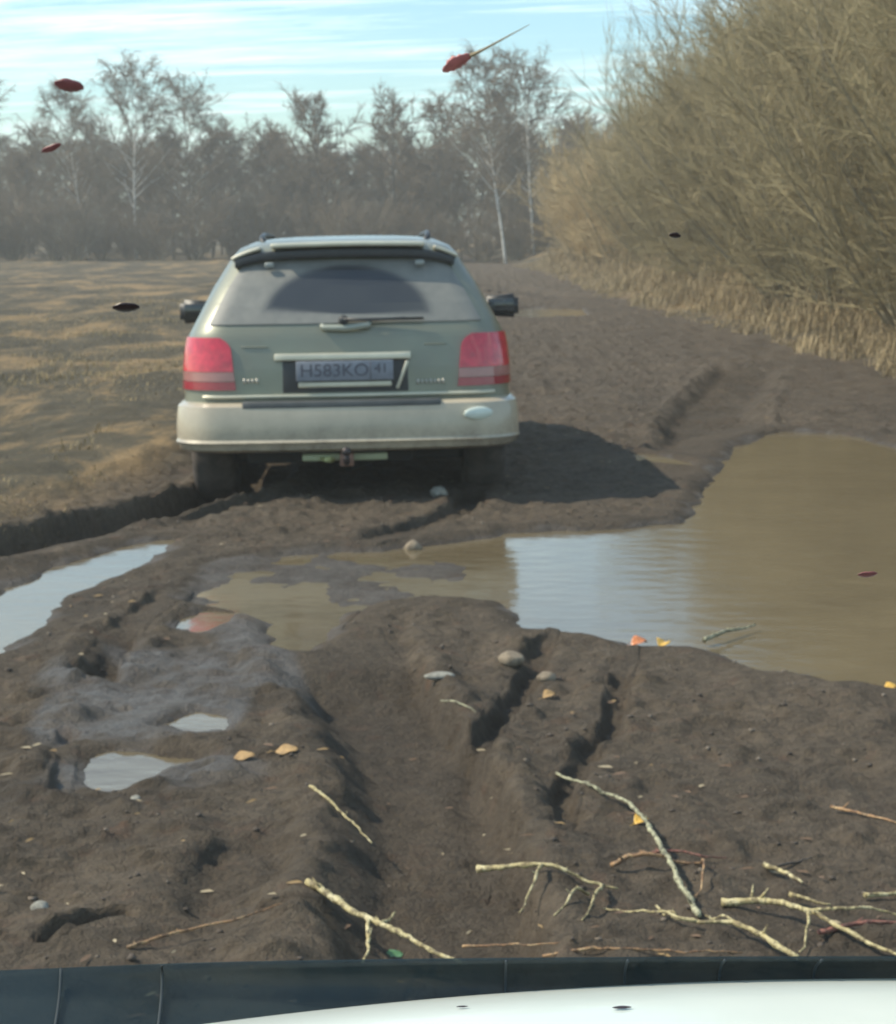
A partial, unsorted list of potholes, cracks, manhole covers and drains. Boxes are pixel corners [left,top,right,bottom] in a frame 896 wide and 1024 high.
pothole [76,738,201,792]
pothole [165,607,238,632]
pothole [143,702,249,732]
